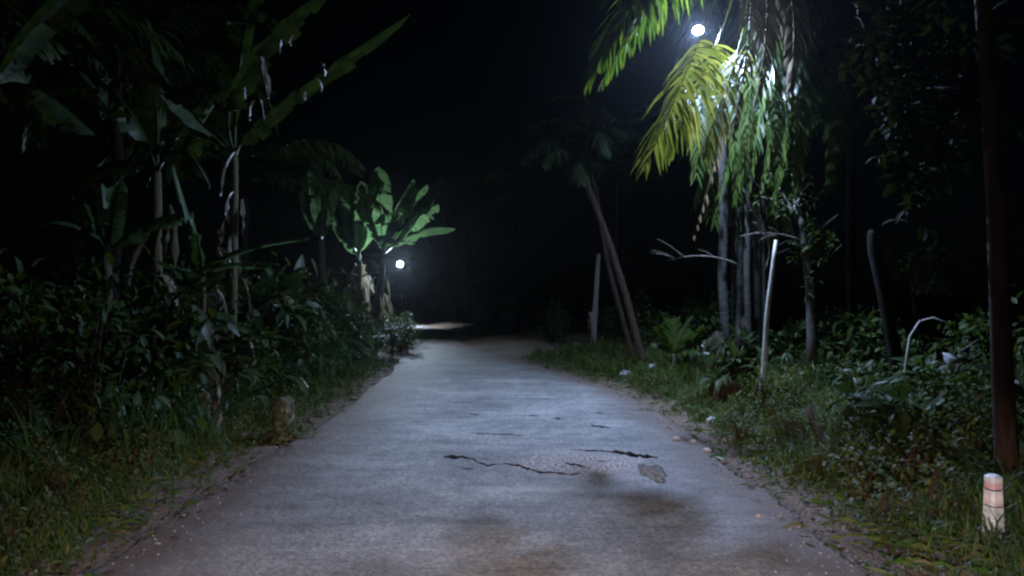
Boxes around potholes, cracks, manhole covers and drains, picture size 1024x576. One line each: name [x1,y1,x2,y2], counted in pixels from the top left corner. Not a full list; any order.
crack [442,450,658,475]
pothole [638,464,668,484]
